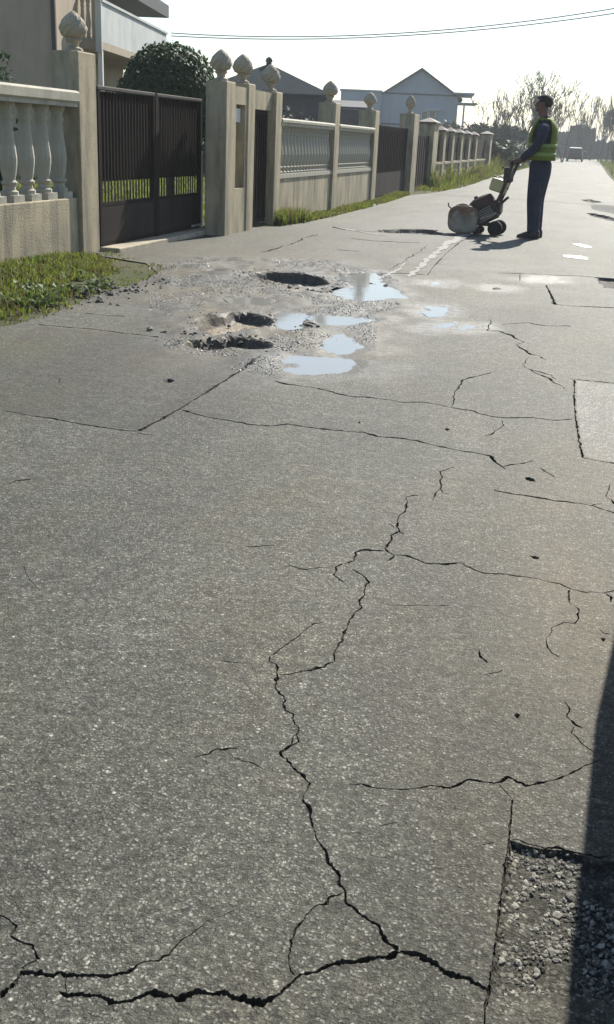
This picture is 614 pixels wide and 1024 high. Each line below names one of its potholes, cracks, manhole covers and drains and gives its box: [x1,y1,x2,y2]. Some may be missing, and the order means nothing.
pothole [241,271,331,287]
pothole [180,336,276,350]
pothole [489,840,614,1001]
crack [0,372,614,1024]
pothole [194,311,275,336]
crack [487,318,566,388]
